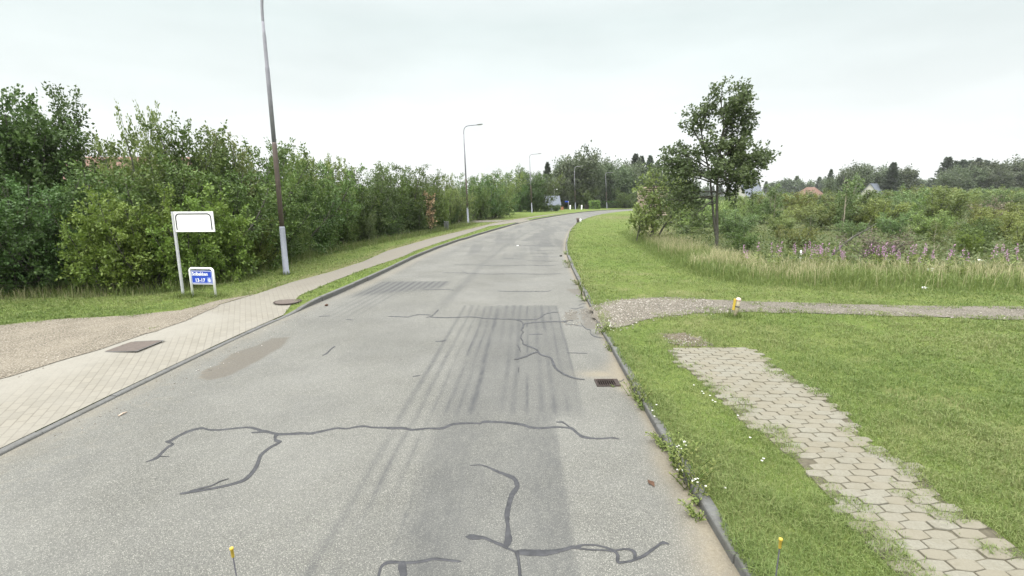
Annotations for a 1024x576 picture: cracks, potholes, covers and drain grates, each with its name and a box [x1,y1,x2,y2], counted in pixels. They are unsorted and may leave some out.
manhole cover [107,340,164,352]
drain grate [594,379,621,387]
